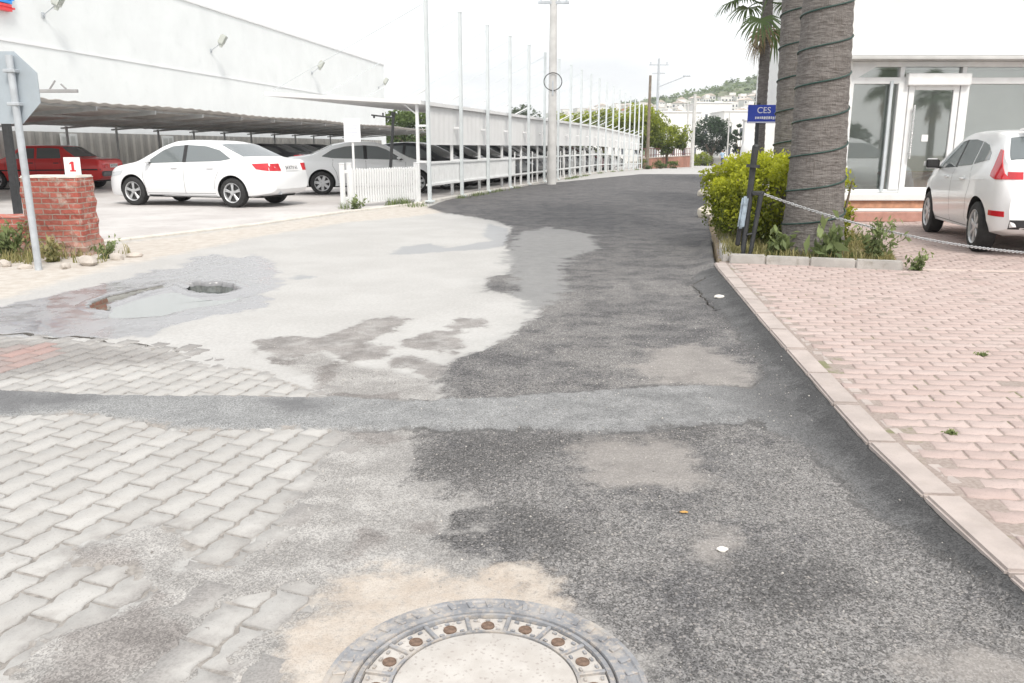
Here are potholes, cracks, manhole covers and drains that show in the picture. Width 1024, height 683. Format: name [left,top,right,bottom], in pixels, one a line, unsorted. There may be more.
pothole [163,280,251,297]
pothole [75,282,190,313]
manhole cover [322,598,648,683]
crack [688,276,719,311]
